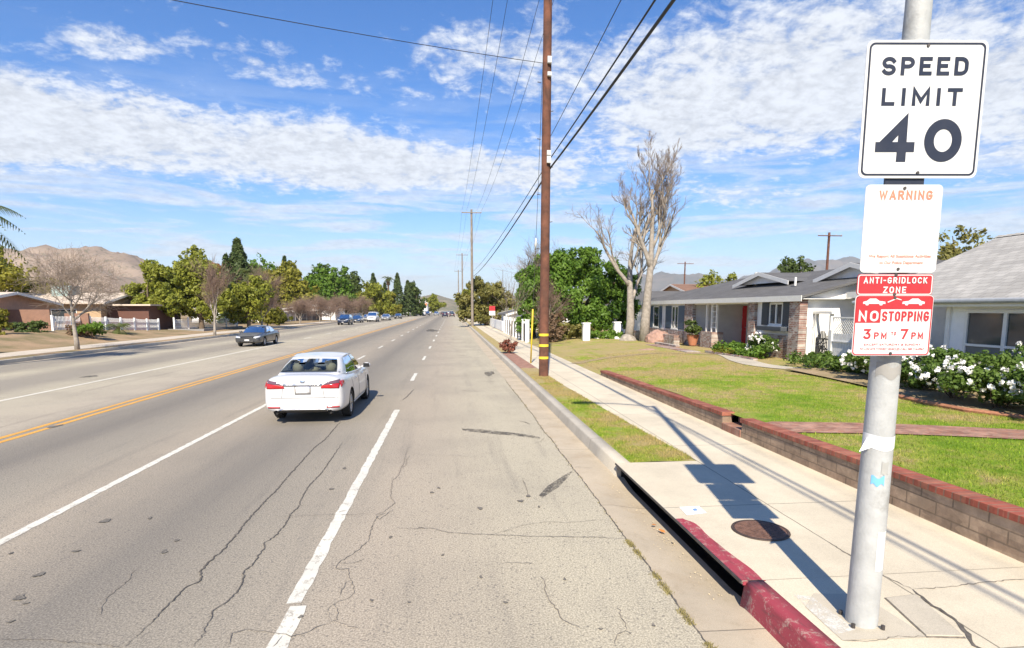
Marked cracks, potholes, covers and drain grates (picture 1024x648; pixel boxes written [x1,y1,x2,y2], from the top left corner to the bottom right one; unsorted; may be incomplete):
manhole cover [731,520,791,541]
crack [509,562,579,627]
crack [8,424,483,647]
crack [419,520,626,539]
